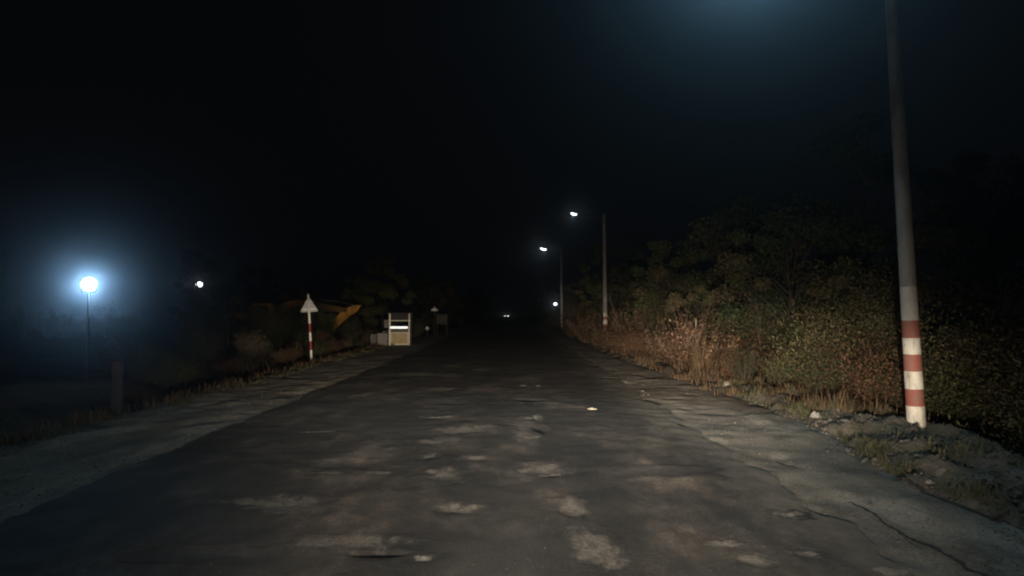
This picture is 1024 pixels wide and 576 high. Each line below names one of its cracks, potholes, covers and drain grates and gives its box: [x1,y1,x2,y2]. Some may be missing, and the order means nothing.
pothole [526,423,555,436]
pothole [764,509,816,521]
pothole [327,548,427,560]
pothole [275,533,445,558]
crack [850,502,989,576]
